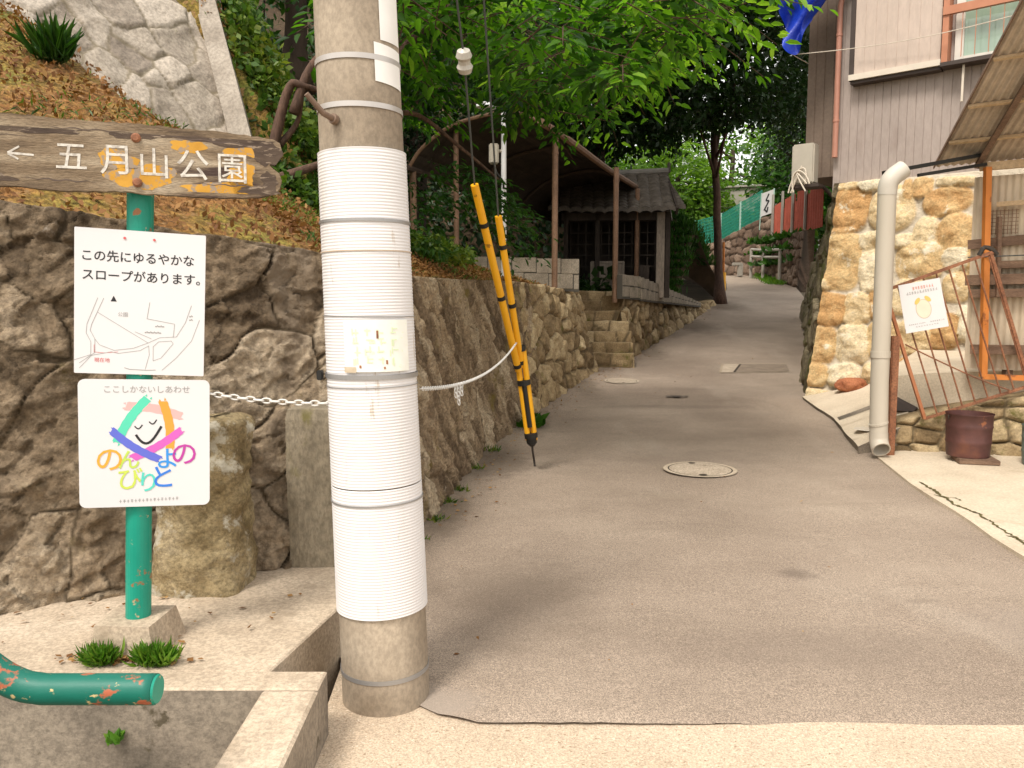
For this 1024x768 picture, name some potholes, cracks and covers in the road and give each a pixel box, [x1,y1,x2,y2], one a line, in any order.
manhole cover [719,364,789,373]
manhole cover [663,462,737,477]
crack [920,482,1024,544]
